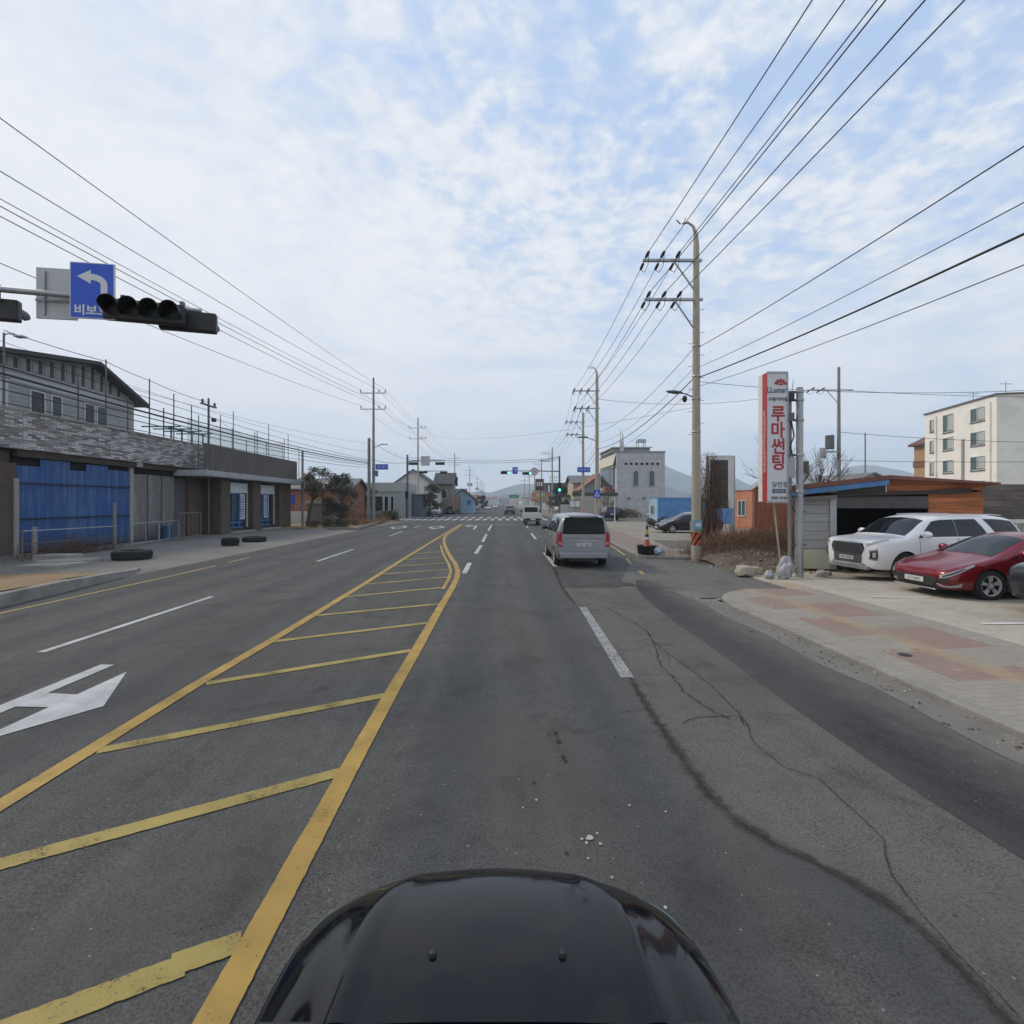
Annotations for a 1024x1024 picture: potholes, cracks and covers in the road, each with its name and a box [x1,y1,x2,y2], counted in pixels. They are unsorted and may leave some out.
crack [606,612,1023,1024]
